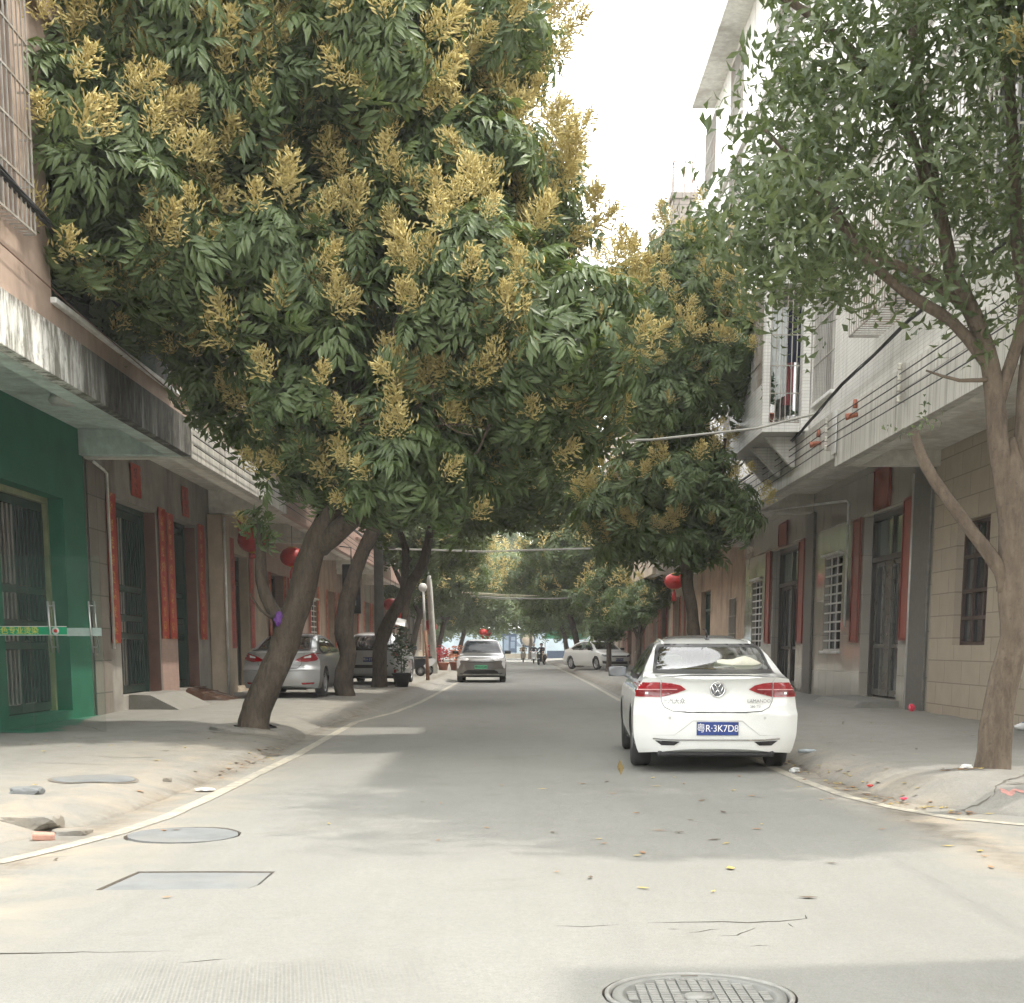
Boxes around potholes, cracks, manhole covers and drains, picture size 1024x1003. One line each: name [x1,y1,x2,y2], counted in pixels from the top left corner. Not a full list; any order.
manhole cover [123,827,241,844]
utility cover [97,871,275,890]
crack [572,915,807,946]
manhole cover [602,972,798,1003]
